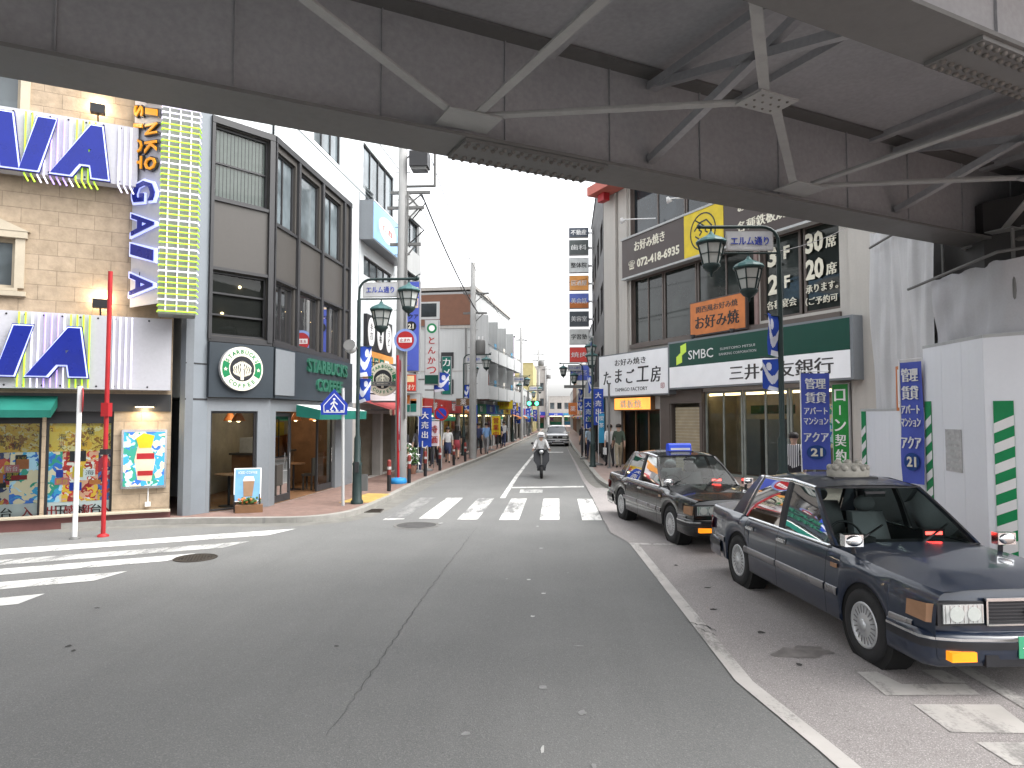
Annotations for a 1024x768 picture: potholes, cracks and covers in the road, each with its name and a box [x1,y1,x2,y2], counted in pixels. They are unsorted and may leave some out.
manhole cover [173,553,218,562]
crack [326,531,474,735]
